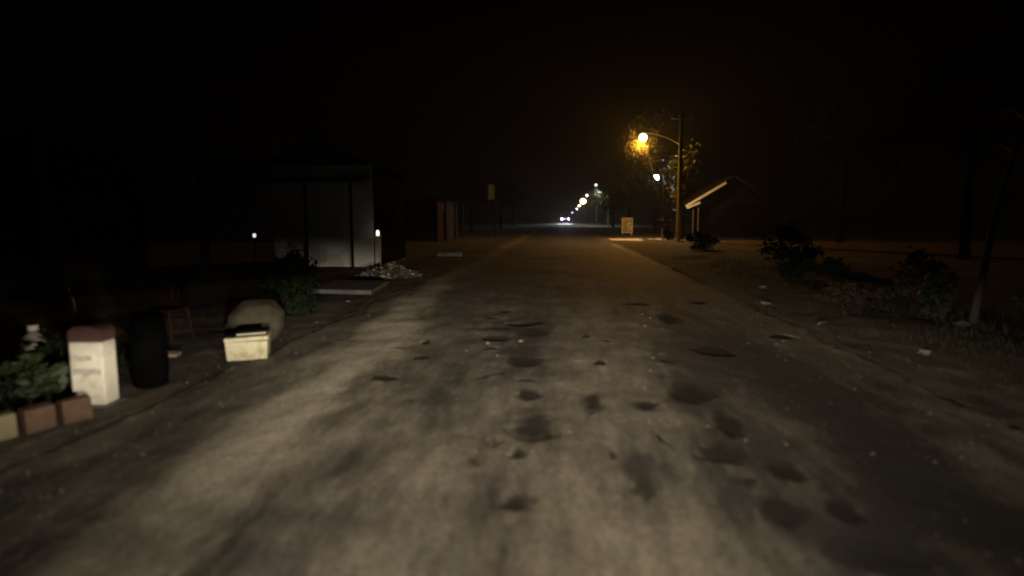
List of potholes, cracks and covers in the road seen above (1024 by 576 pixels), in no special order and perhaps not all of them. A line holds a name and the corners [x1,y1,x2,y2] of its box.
pothole [500,408,563,443]
pothole [511,388,545,402]
pothole [751,491,811,532]
pothole [627,470,658,502]
pothole [818,497,870,525]
pothole [578,390,607,416]
pothole [765,460,813,483]
pothole [666,382,718,405]
pothole [654,312,683,325]
pothole [688,347,736,357]
pothole [503,353,546,367]
pothole [506,446,531,459]
